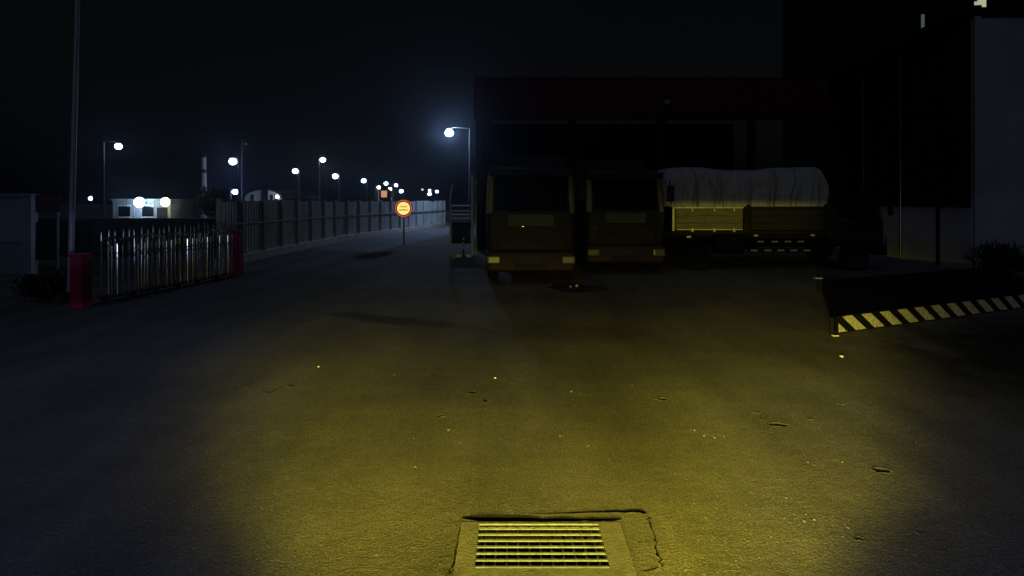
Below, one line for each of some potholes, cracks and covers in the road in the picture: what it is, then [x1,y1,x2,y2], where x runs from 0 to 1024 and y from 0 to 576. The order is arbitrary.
crack [224,382,286,393]
drain grate [453,522,638,576]
pothole [870,466,895,474]
